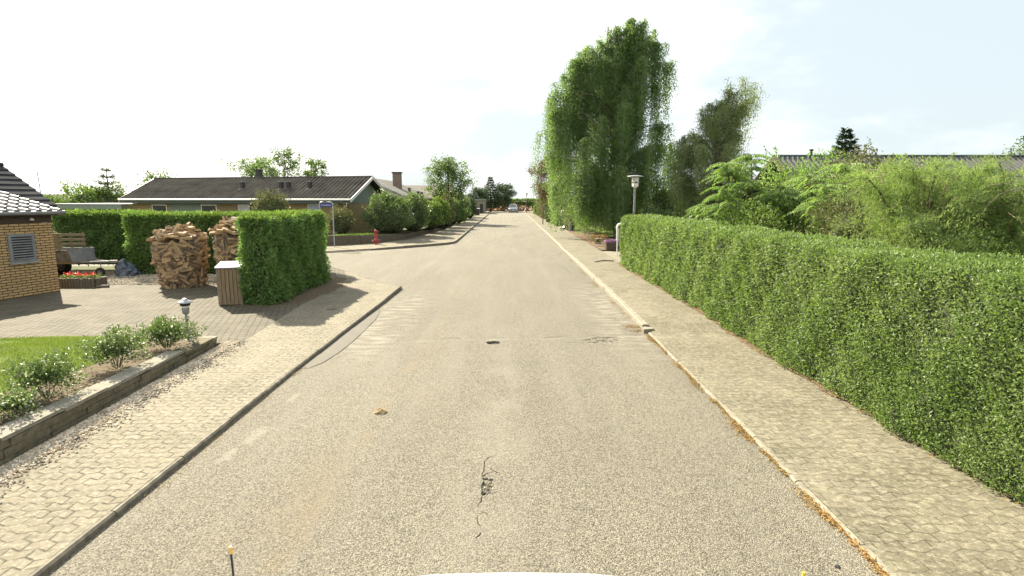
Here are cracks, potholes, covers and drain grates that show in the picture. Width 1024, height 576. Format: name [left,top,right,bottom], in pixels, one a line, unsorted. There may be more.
crack [474,456,498,539]
